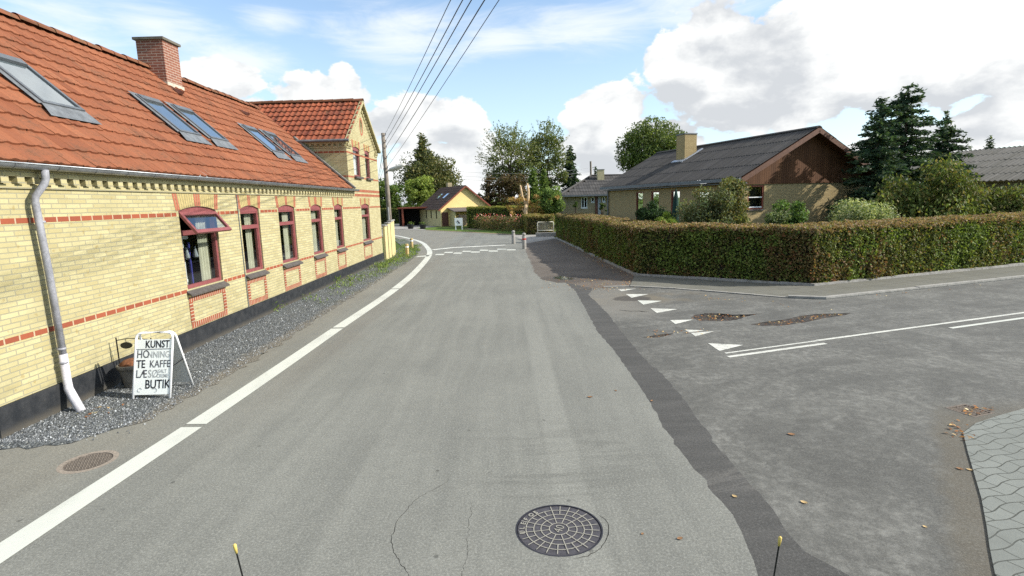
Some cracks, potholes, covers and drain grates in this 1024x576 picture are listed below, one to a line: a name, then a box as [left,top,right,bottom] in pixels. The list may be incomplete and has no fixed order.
crack [391,482,447,575]
pothole [751,313,850,326]
manhole cover [515,505,603,557]
manhole cover [56,450,119,474]
pothole [691,313,761,321]
